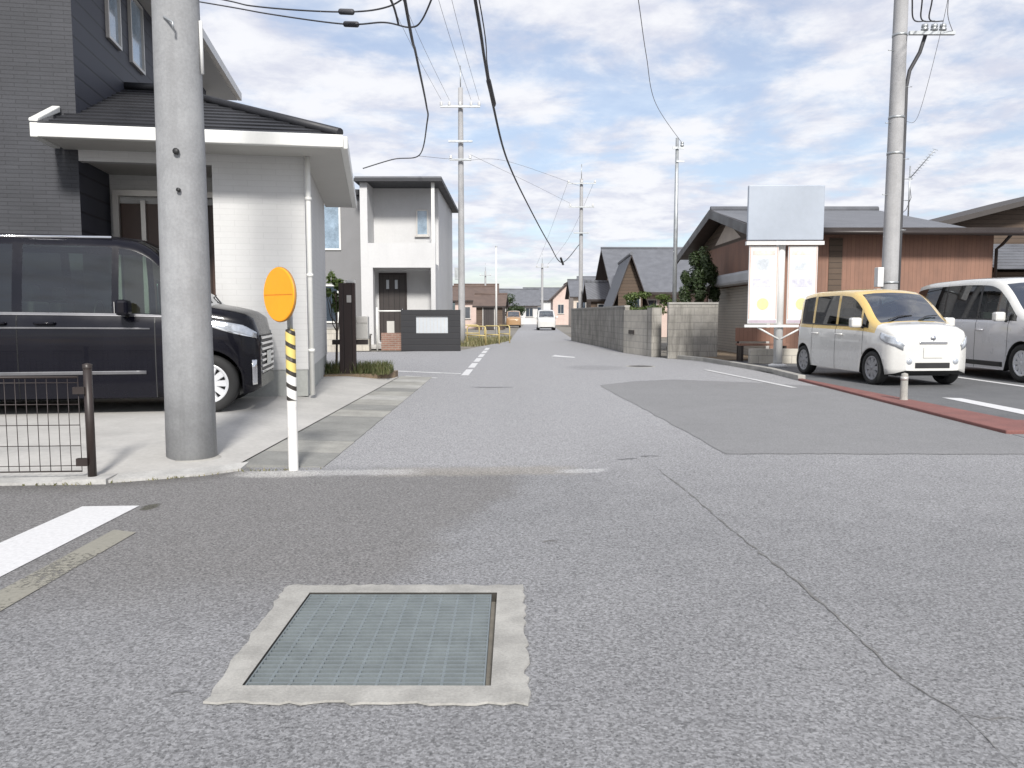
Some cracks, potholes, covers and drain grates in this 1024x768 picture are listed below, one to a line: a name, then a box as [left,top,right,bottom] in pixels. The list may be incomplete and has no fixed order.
crack [659,469,1018,768]
drain grate [203,584,531,706]
